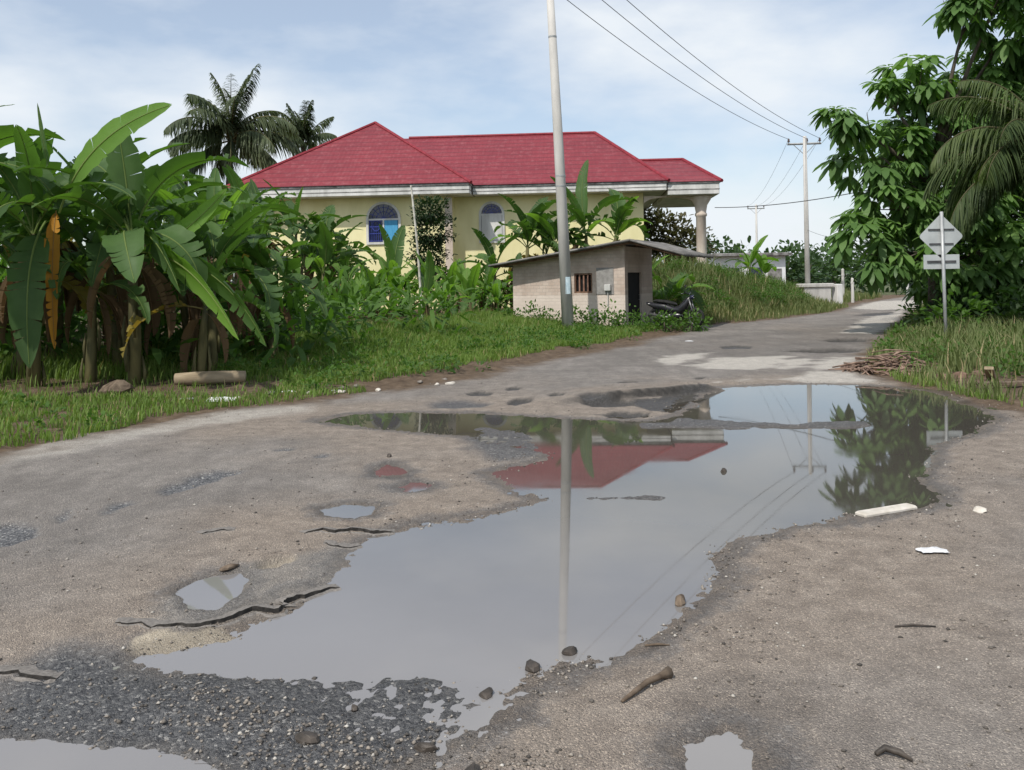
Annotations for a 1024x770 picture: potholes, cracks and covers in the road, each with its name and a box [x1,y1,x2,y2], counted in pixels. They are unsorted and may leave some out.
crack [114,584,341,629]
crack [298,527,395,550]
pothole [74,383,1009,770]
